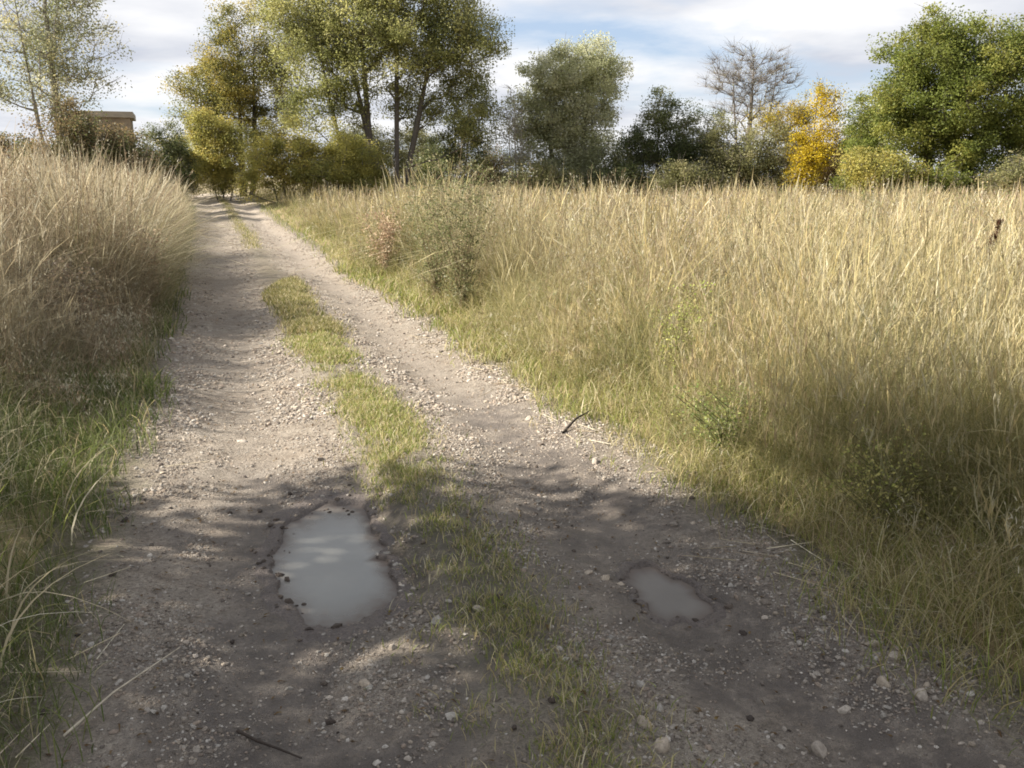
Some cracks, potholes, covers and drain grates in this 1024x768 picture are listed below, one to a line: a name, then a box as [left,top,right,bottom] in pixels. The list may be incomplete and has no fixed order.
pothole [615,559,727,628]
pothole [252,487,414,644]
